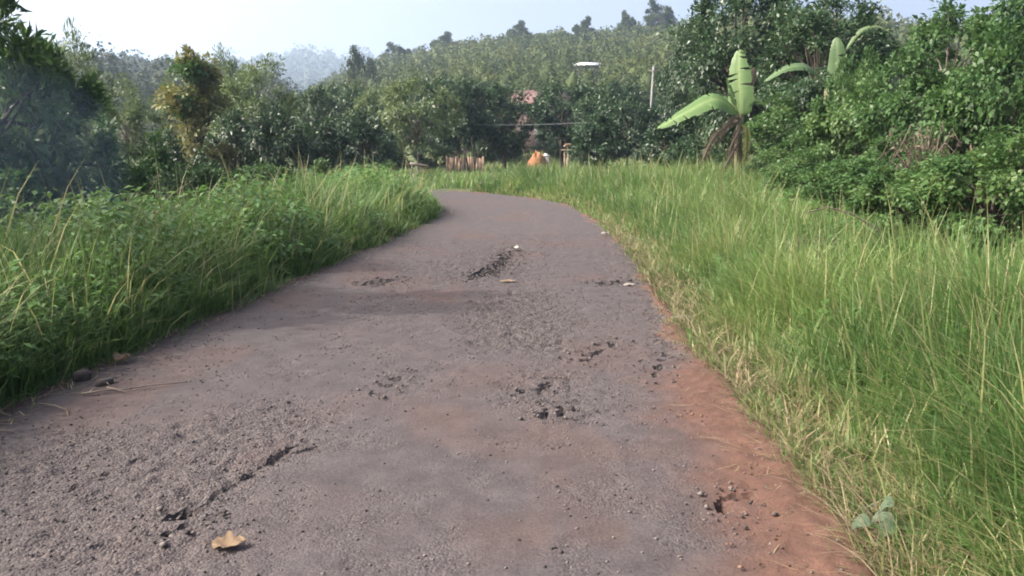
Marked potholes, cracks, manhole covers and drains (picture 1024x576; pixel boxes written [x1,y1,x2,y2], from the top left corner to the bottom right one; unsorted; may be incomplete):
pothole [368,373,408,397]
pothole [362,278,404,287]
pothole [577,341,623,363]
pothole [461,250,520,281]
pothole [537,405,589,420]
pothole [595,279,638,287]
crack [198,439,318,509]
pothole [510,377,557,401]
